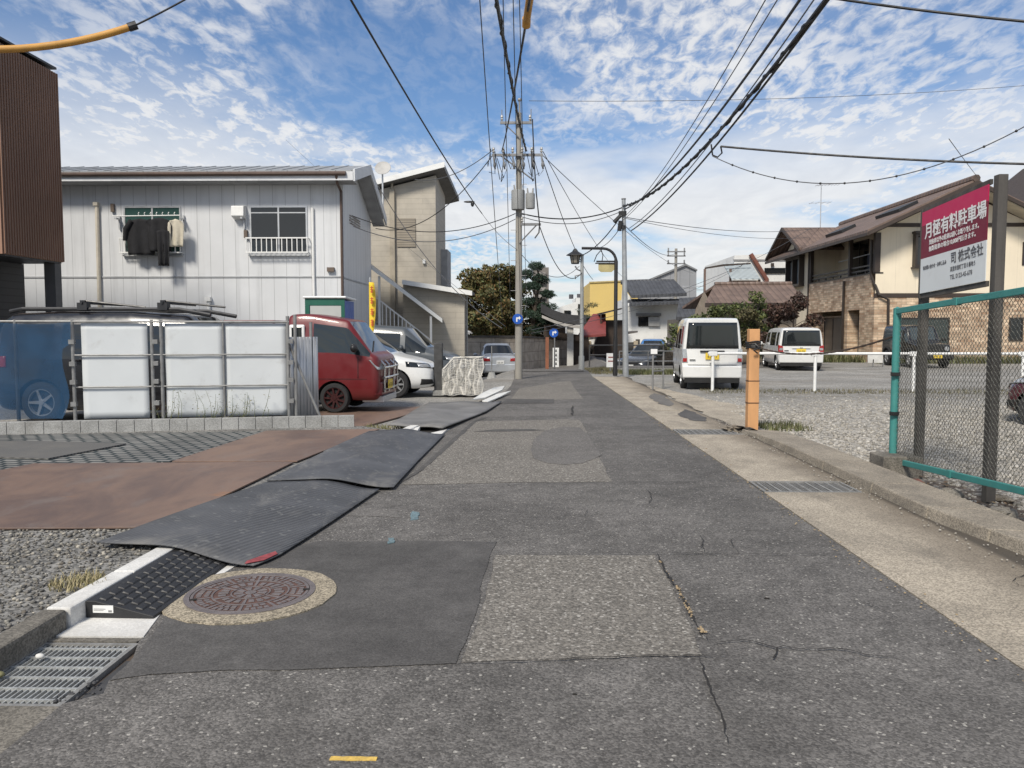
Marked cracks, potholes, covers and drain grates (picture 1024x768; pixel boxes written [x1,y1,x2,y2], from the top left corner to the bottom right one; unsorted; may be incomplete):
drain grate [0,642,138,706]
drain grate [749,481,863,493]
manhole cover [162,568,337,625]
crack [699,658,728,743]
crack [710,639,905,658]
